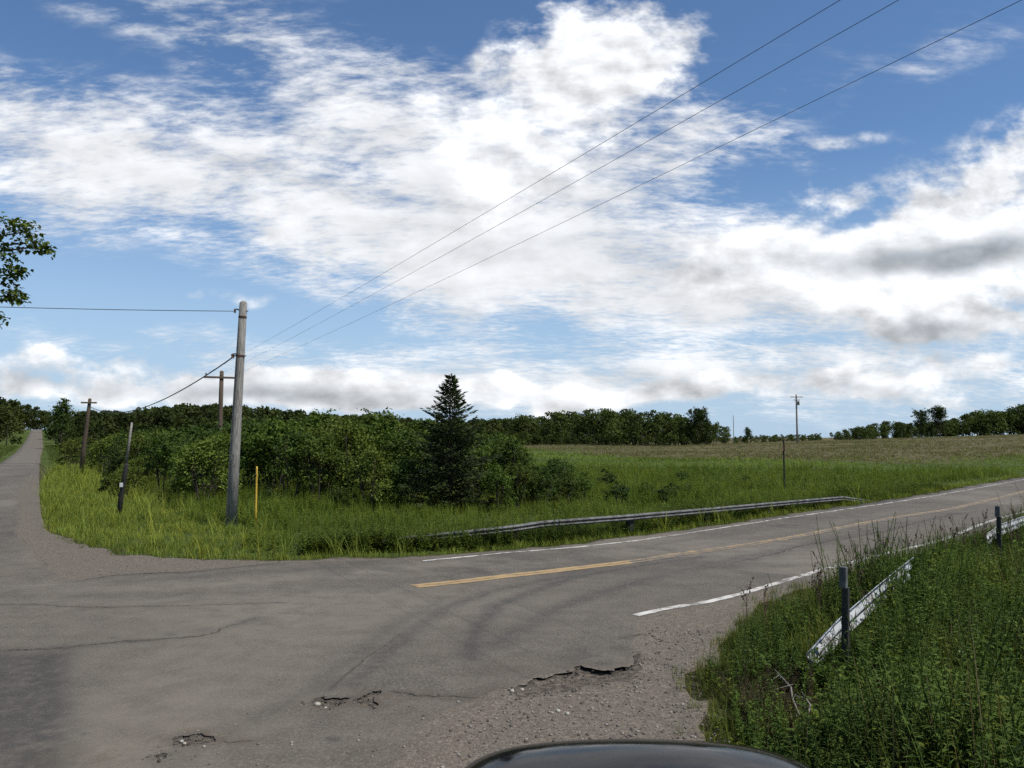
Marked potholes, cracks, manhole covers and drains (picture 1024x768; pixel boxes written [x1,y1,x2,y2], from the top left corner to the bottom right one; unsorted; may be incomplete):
crack [0,602,285,651]
pothole [355,690,382,710]
pothole [312,697,349,708]
pothole [172,733,216,746]
pothole [513,652,645,697]
